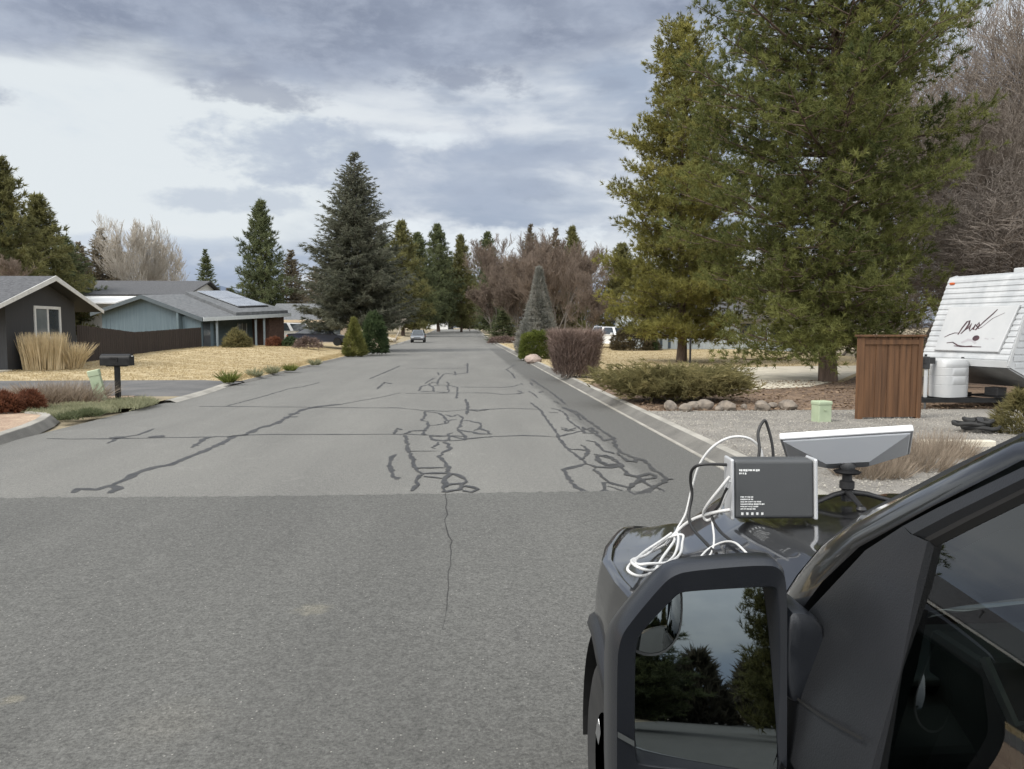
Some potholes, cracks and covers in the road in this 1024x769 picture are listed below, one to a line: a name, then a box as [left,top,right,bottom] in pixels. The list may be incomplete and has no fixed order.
crack [442,493,452,629]
crack [47,429,552,443]
